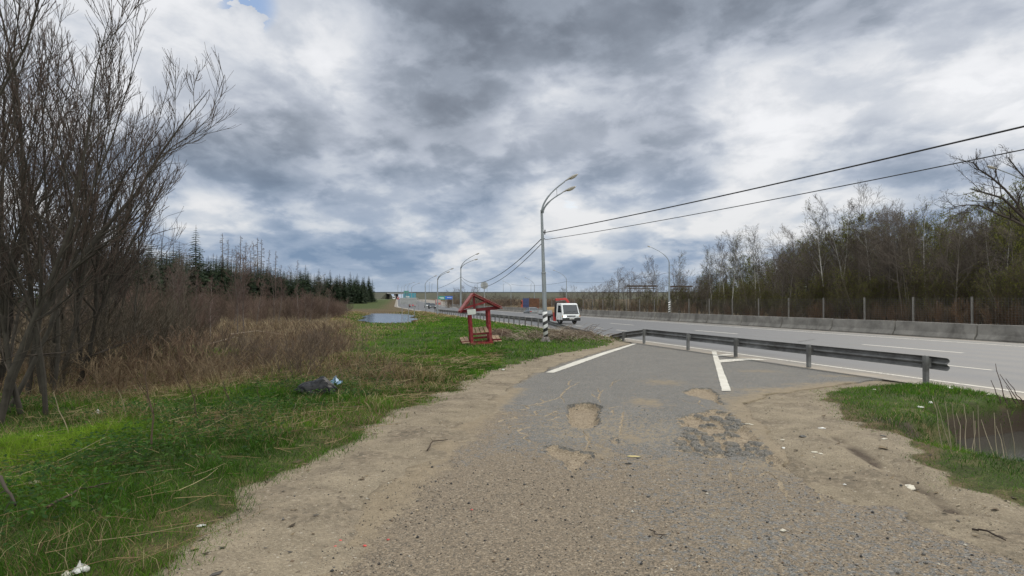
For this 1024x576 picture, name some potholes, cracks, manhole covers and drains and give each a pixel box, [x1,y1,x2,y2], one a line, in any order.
pothole [671,409,784,467]
crack [498,379,625,450]
pothole [680,388,725,405]
pothole [543,444,595,473]
pothole [565,402,604,429]
